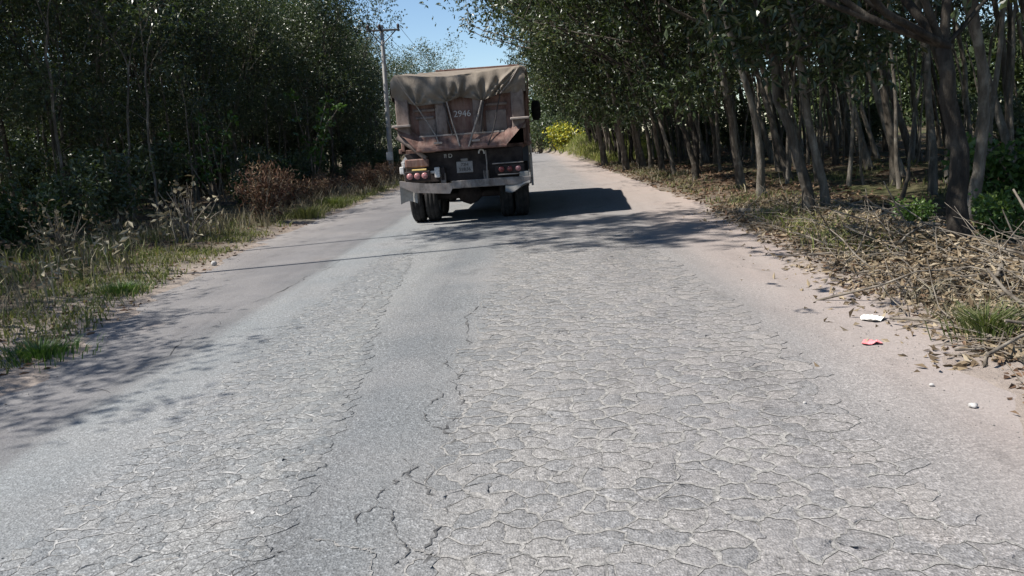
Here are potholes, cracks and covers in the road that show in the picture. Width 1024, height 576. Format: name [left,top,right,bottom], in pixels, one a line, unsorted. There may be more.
crack [0,231,1024,576]
